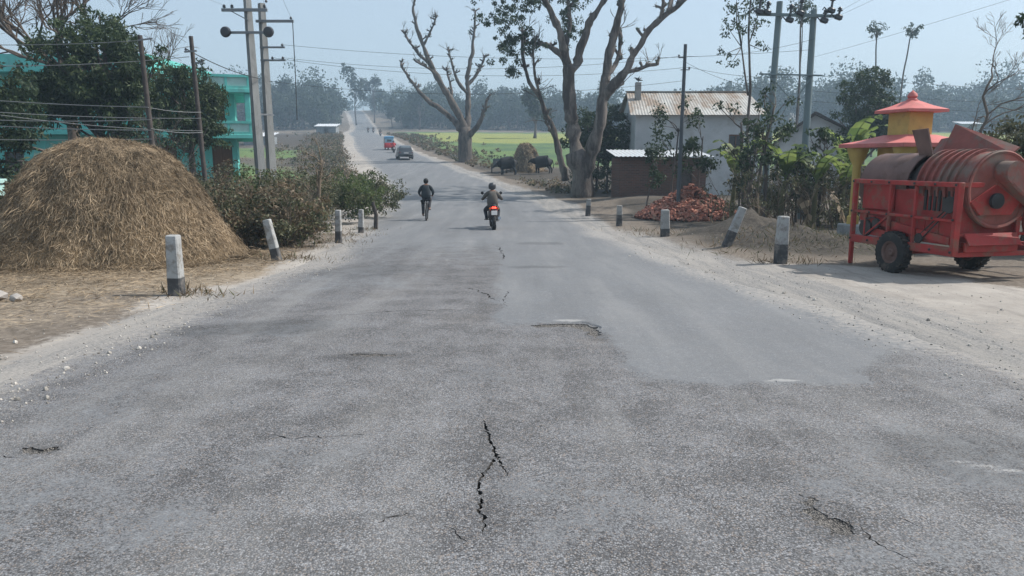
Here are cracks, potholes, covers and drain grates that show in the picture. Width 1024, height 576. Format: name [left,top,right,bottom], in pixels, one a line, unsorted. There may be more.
pothole [531,324,602,338]
crack [445,420,508,543]
crack [862,518,923,565]
